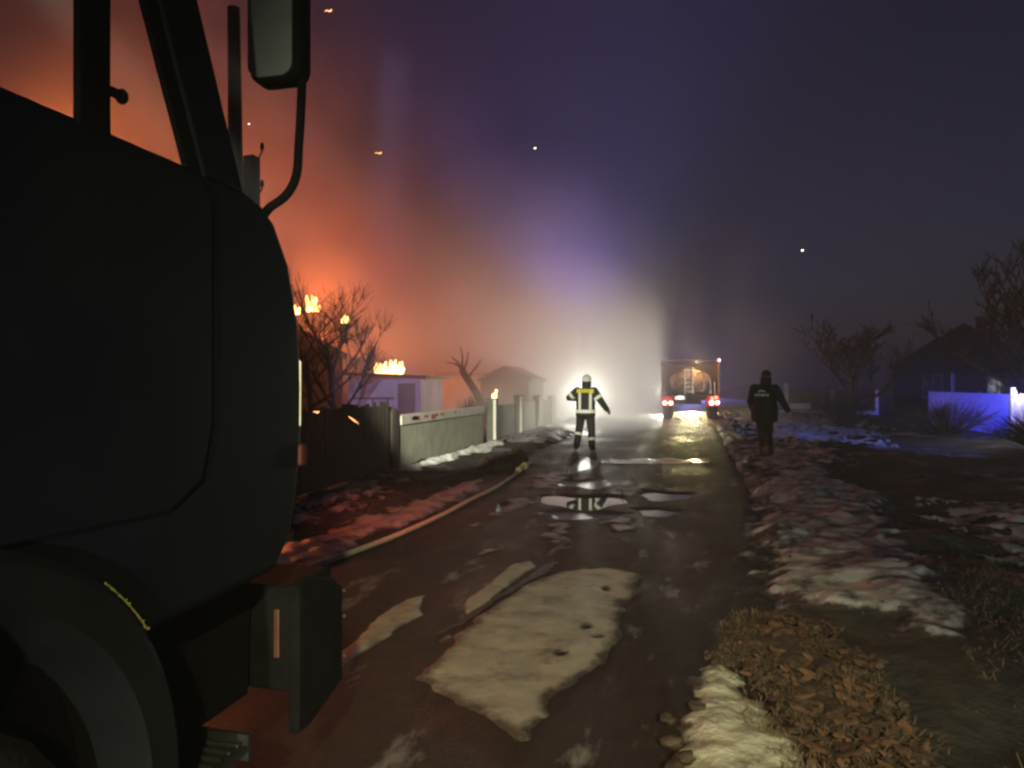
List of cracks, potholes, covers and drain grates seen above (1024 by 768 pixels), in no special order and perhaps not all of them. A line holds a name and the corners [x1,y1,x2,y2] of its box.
pothole [633,508,684,517]
pothole [542,495,627,511]
pothole [638,491,695,501]
pothole [538,509,630,520]
